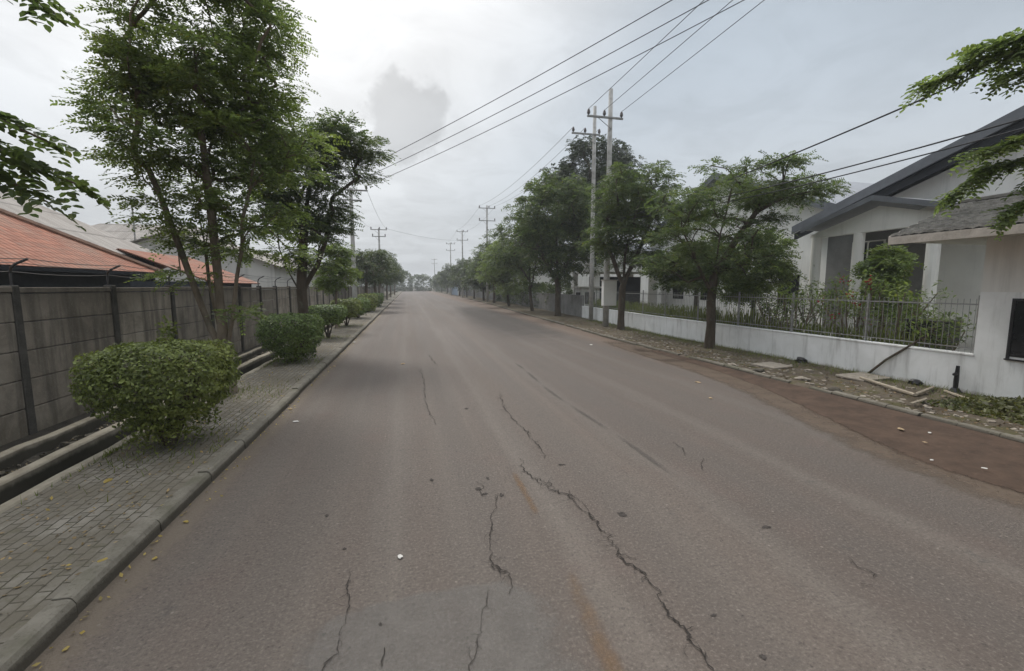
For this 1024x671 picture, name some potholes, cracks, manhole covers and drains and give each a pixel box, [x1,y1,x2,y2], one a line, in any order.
crack [498,395,714,671]
crack [466,481,513,671]
crack [322,571,351,671]
